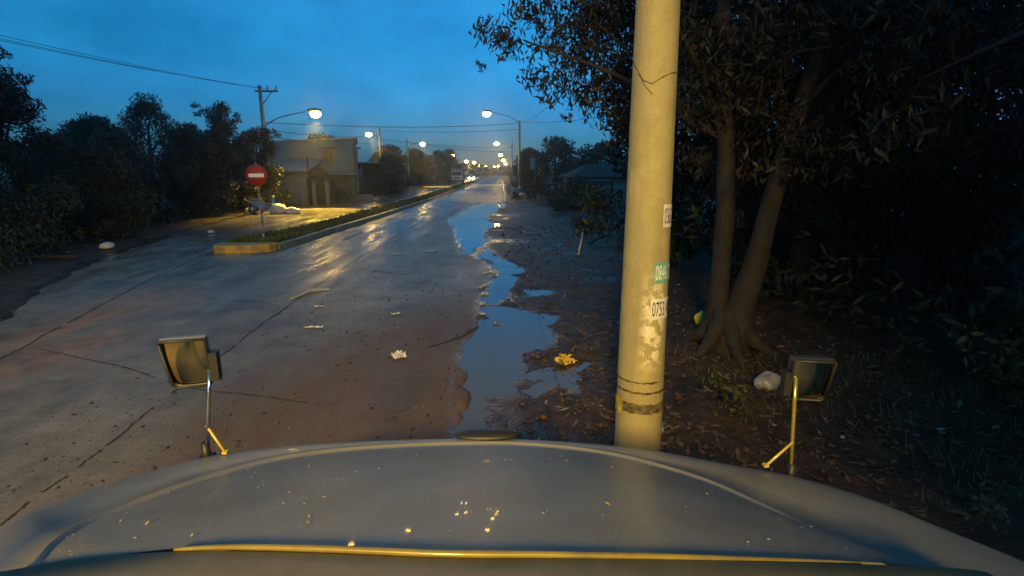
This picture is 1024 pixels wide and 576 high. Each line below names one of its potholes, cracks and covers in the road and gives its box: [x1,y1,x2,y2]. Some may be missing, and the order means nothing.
crack [0,225,414,526]
